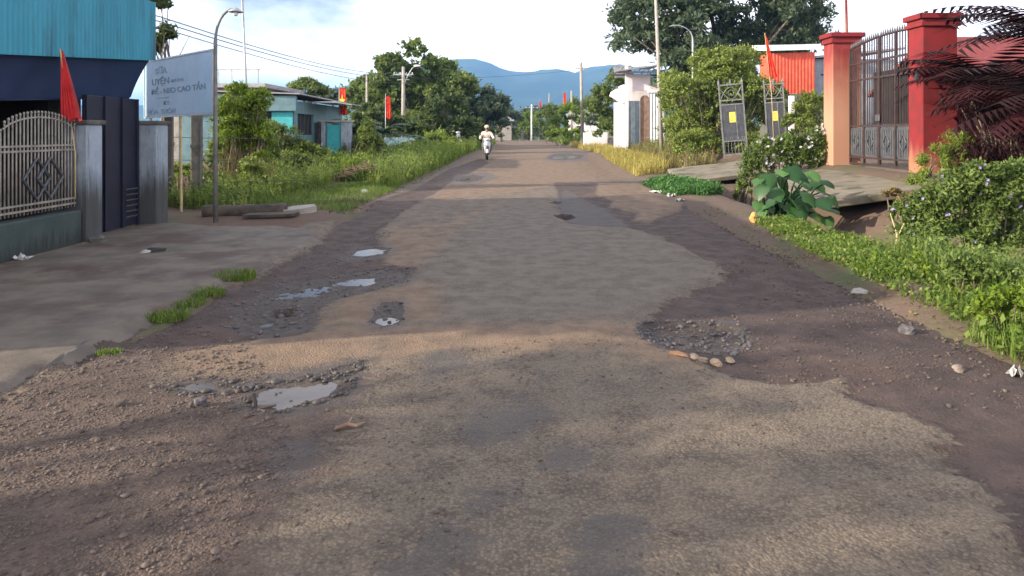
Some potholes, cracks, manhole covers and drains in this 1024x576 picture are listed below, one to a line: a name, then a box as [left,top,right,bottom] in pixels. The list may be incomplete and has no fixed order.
pothole [158,374,250,397]
pothole [220,265,416,339]
pothole [239,360,369,416]
pothole [633,319,754,357]
pothole [345,247,392,258]
